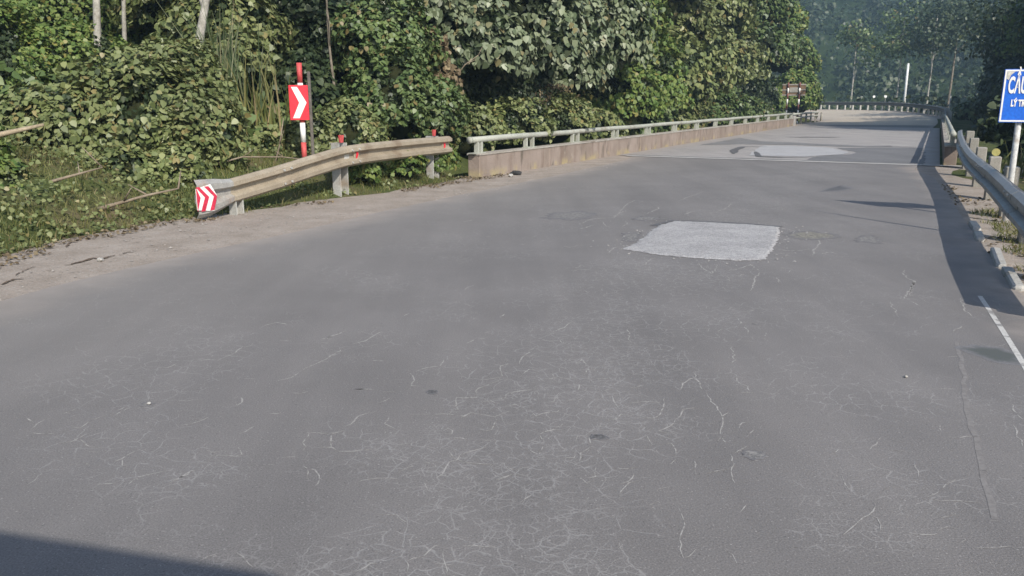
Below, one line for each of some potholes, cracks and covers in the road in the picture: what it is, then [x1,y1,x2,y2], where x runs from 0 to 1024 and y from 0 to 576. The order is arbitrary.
crack [406,544,451,575]
crack [843,486,890,535]
crack [207,397,253,457]
crack [274,331,380,394]
crack [361,310,767,511]
crack [114,451,195,484]
crack [679,509,696,558]
crack [259,389,408,486]
crack [870,298,1023,548]
crack [890,269,920,316]
pothole [741,450,768,461]
